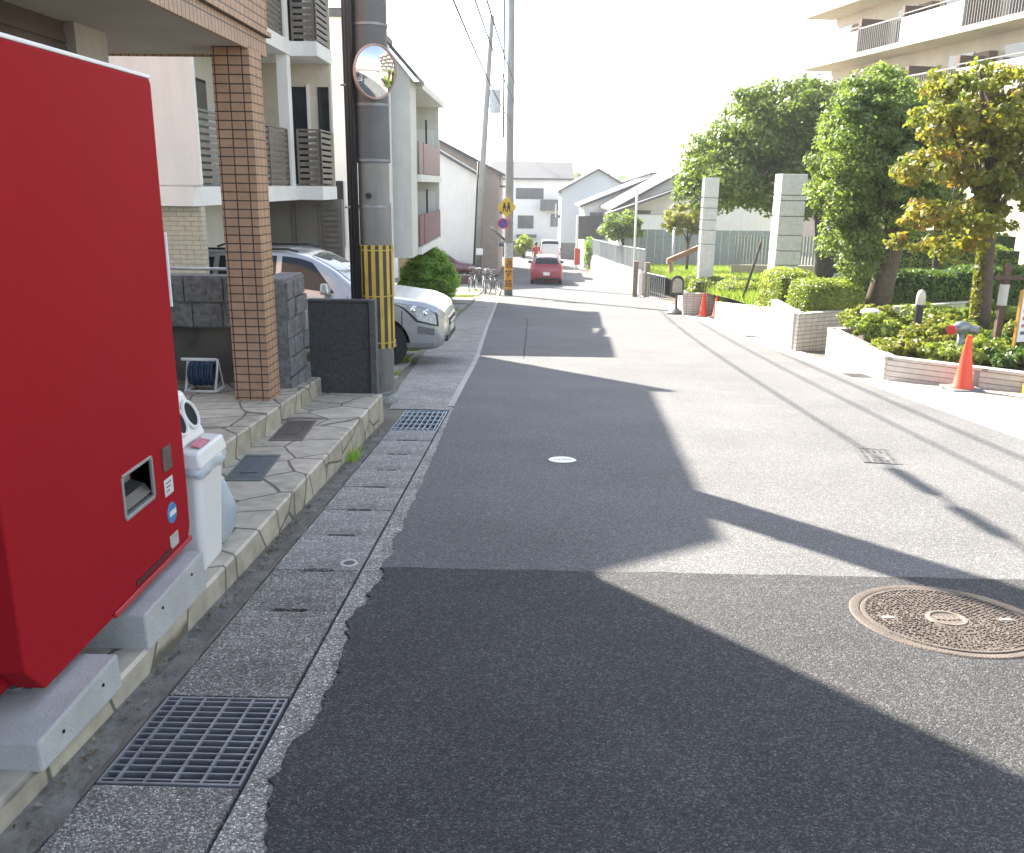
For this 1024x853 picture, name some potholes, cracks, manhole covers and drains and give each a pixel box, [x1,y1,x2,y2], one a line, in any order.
drain grate [96,696,289,796]
utility cover [224,454,281,481]
utility cover [853,447,903,465]
manhole cover [849,585,1024,660]
utility cover [268,420,317,441]
drain grate [390,410,448,434]
